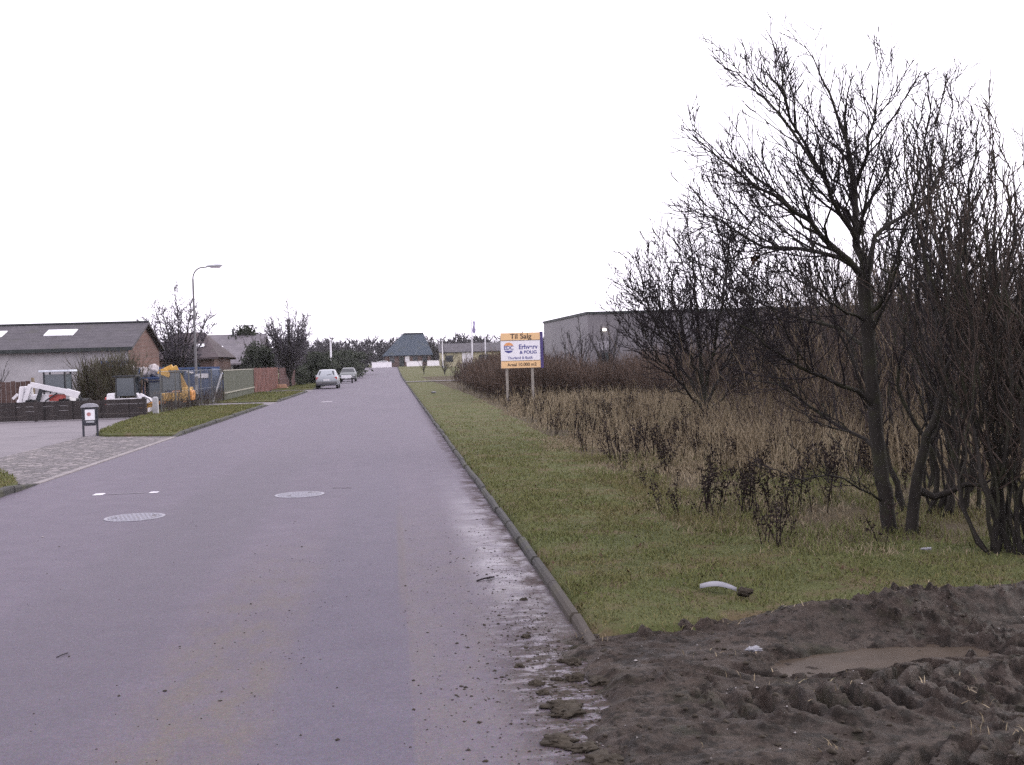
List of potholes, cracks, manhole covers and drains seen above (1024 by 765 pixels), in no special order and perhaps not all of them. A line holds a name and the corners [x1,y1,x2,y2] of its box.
manhole cover [104,513,165,522]
